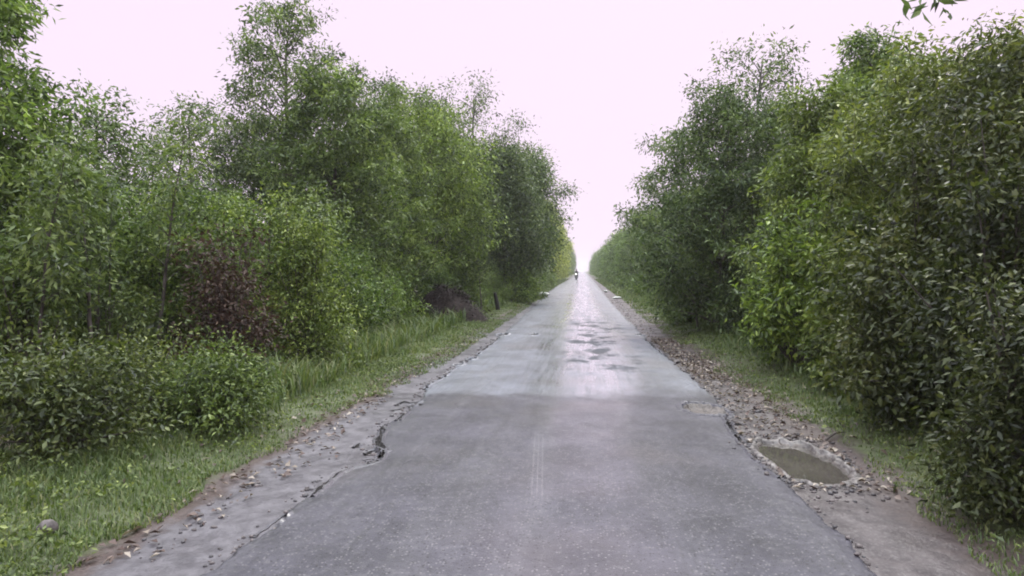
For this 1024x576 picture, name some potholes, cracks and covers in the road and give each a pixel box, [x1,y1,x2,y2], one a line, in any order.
pothole [746,437,862,489]
crack [254,368,457,538]
pothole [675,401,737,419]
